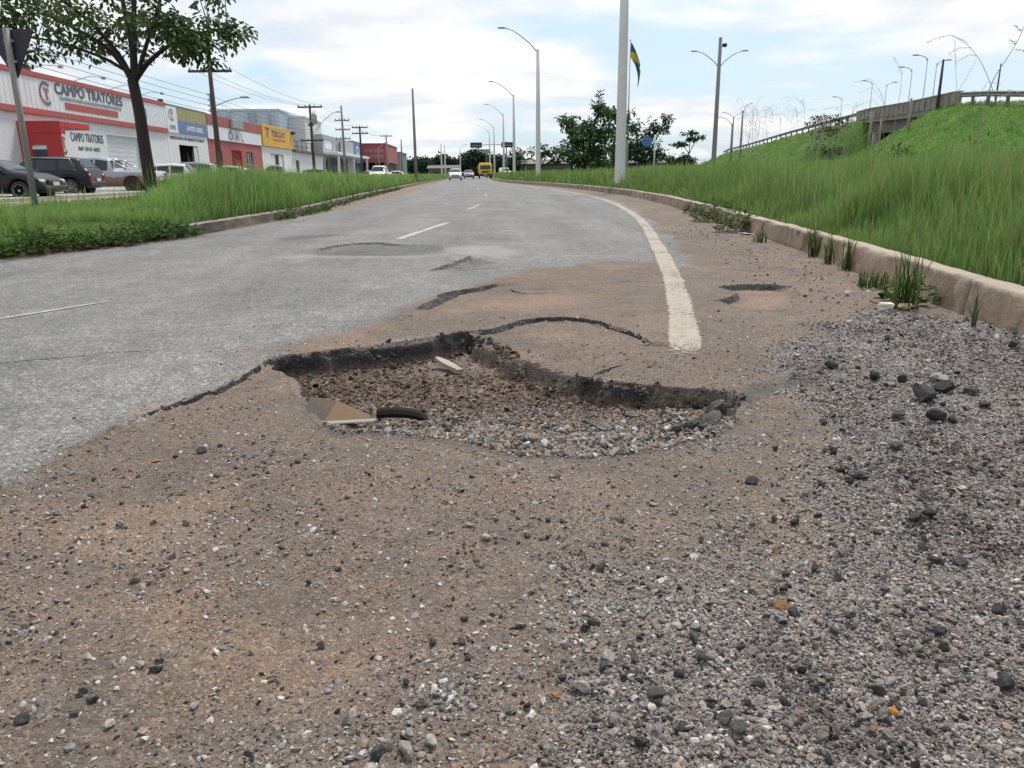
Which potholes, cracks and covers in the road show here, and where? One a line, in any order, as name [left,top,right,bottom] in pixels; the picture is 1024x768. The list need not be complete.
crack [0,348,273,439]
pothole [707,283,812,311]
crack [412,267,678,346]
pothole [255,329,754,459]
